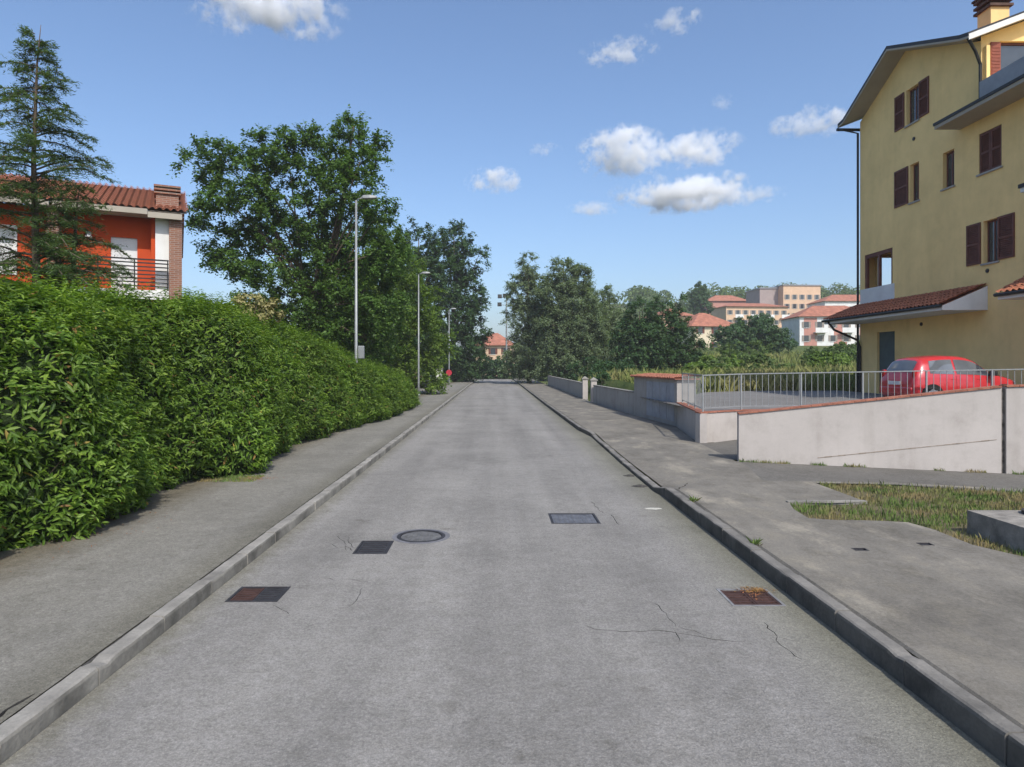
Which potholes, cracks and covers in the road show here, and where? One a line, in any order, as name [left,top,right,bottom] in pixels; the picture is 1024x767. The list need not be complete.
manhole cover [548,513,601,524]
drain grate [716,589,786,606]
drain grate [225,586,291,602]
crack [590,604,738,642]
manhole cover [392,529,450,544]
drain grate [352,541,394,554]
